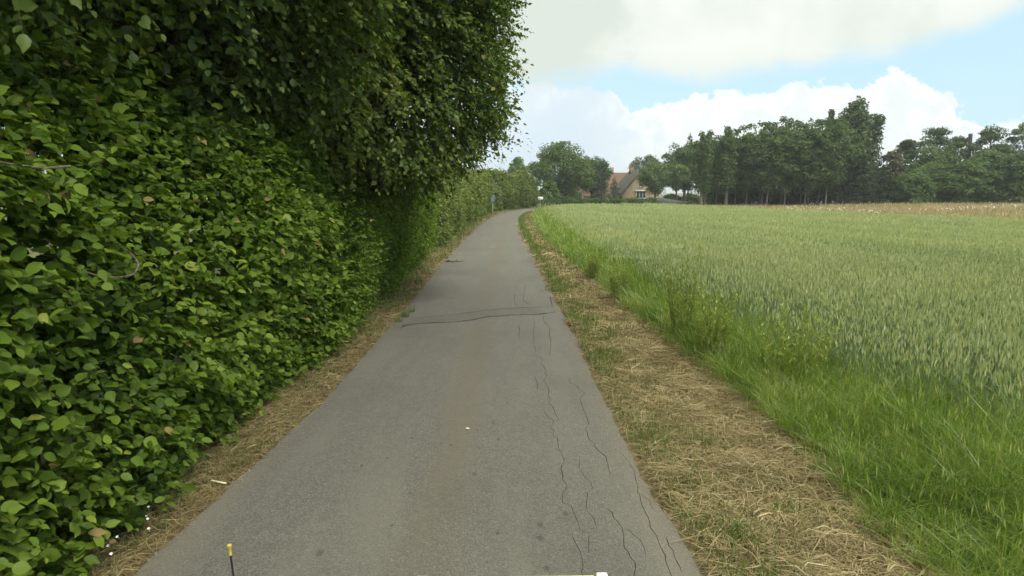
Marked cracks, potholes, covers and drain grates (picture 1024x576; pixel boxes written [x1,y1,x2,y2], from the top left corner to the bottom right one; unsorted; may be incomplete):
crack [401,284,682,576]
